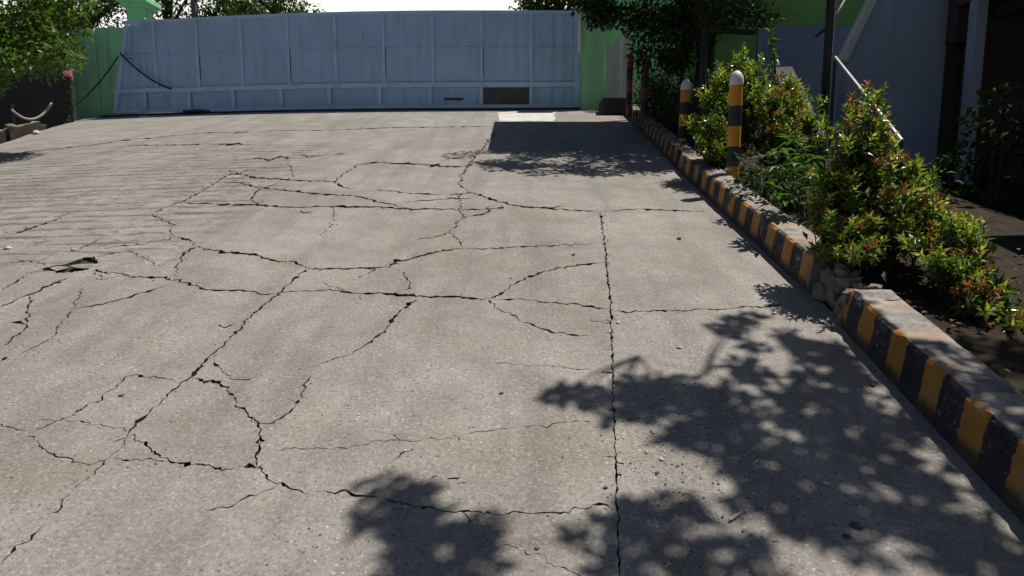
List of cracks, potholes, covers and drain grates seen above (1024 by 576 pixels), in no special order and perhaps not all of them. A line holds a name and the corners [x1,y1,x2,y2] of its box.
crack [0,126,779,564]
pothole [41,256,98,273]
crack [500,544,581,576]
